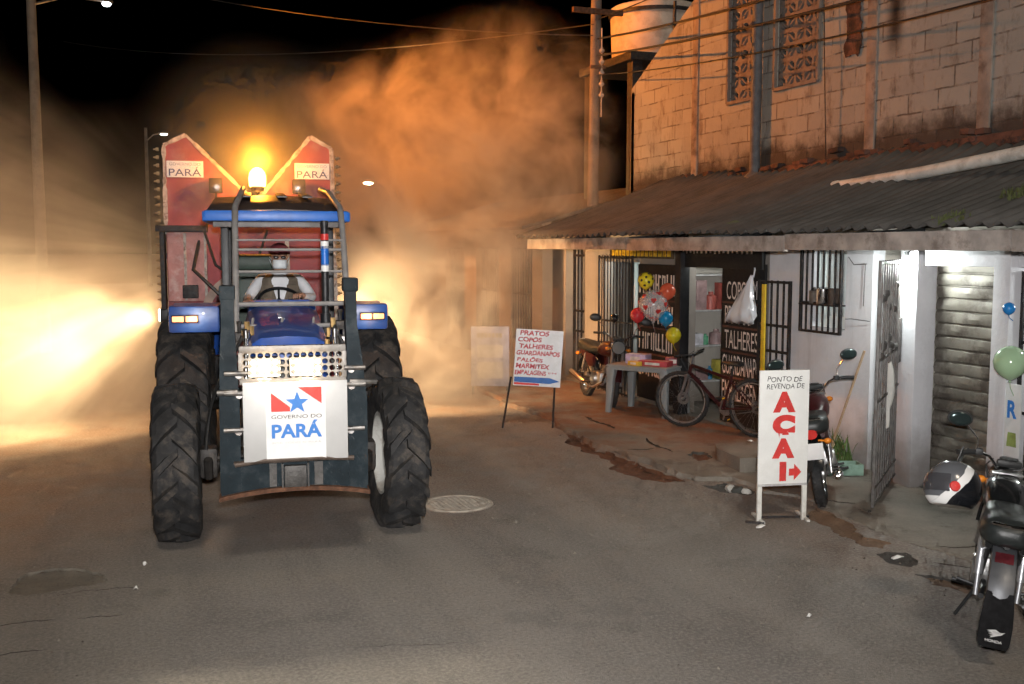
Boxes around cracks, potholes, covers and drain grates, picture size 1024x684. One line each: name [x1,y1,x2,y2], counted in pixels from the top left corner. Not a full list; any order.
pothole [877,552,918,567]
manhole cover [426,495,493,513]
crack [585,416,615,429]
crack [629,438,673,452]
